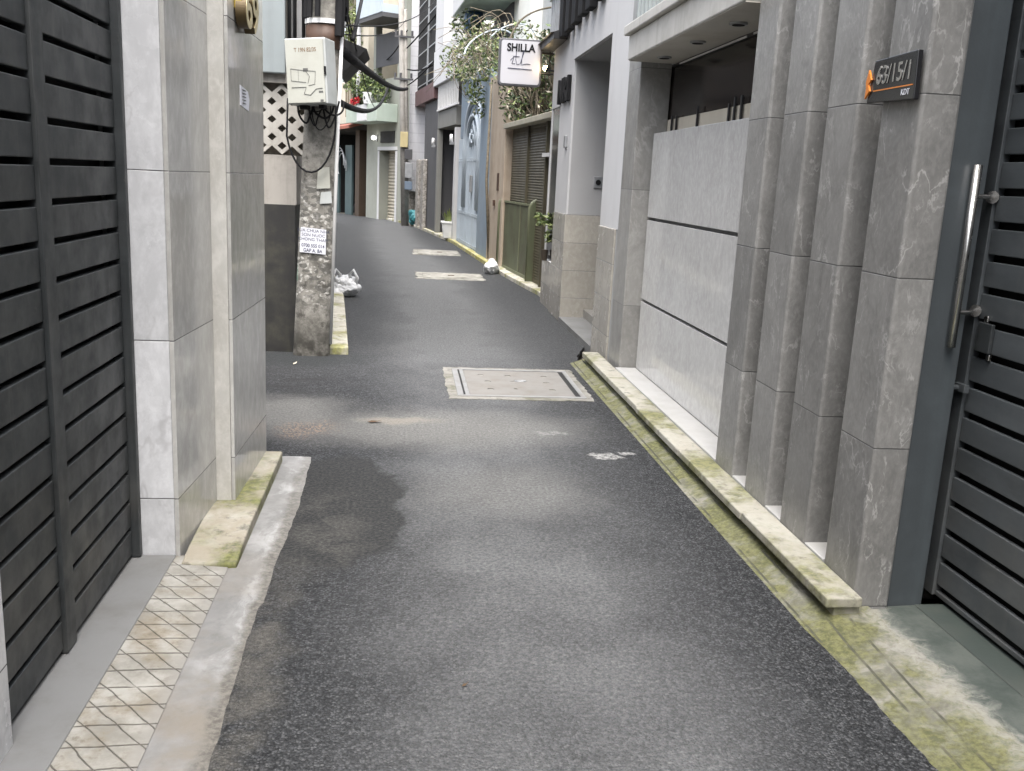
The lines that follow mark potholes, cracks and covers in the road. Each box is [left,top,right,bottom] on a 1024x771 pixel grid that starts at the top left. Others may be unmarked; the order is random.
manhole cover [415,272,485,281]
manhole cover [442,367,594,402]
